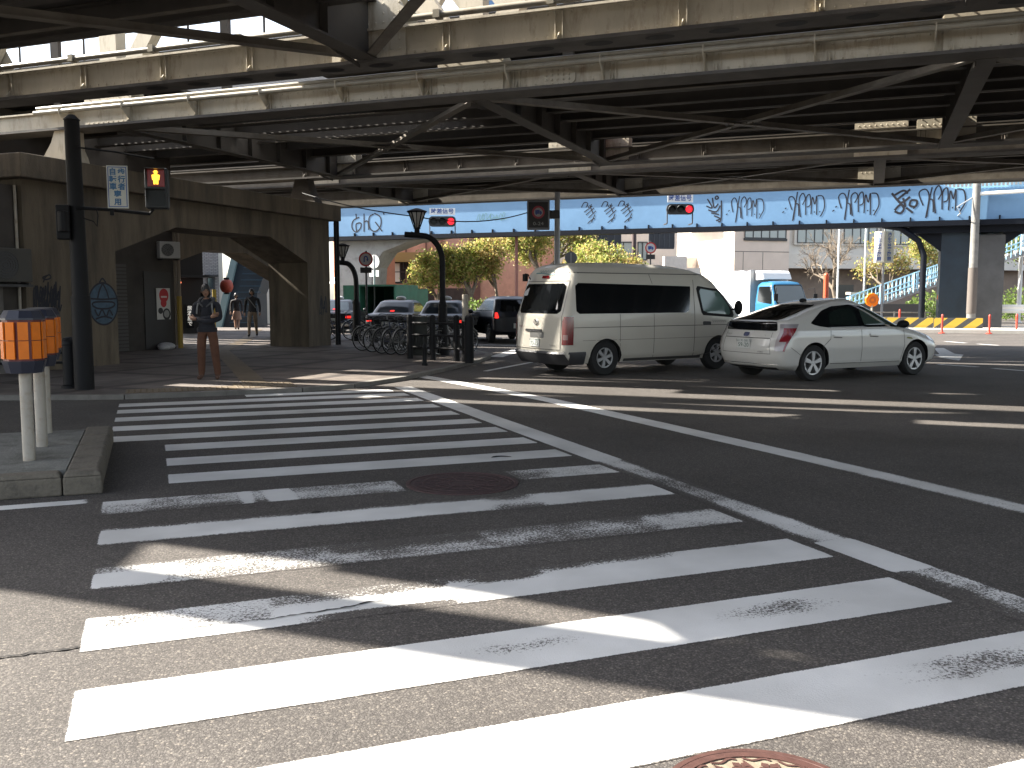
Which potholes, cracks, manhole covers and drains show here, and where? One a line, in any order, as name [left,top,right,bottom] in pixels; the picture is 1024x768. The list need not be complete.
manhole cover [406,472,518,495]
manhole cover [672,749,830,768]
crack [0,575,527,658]
